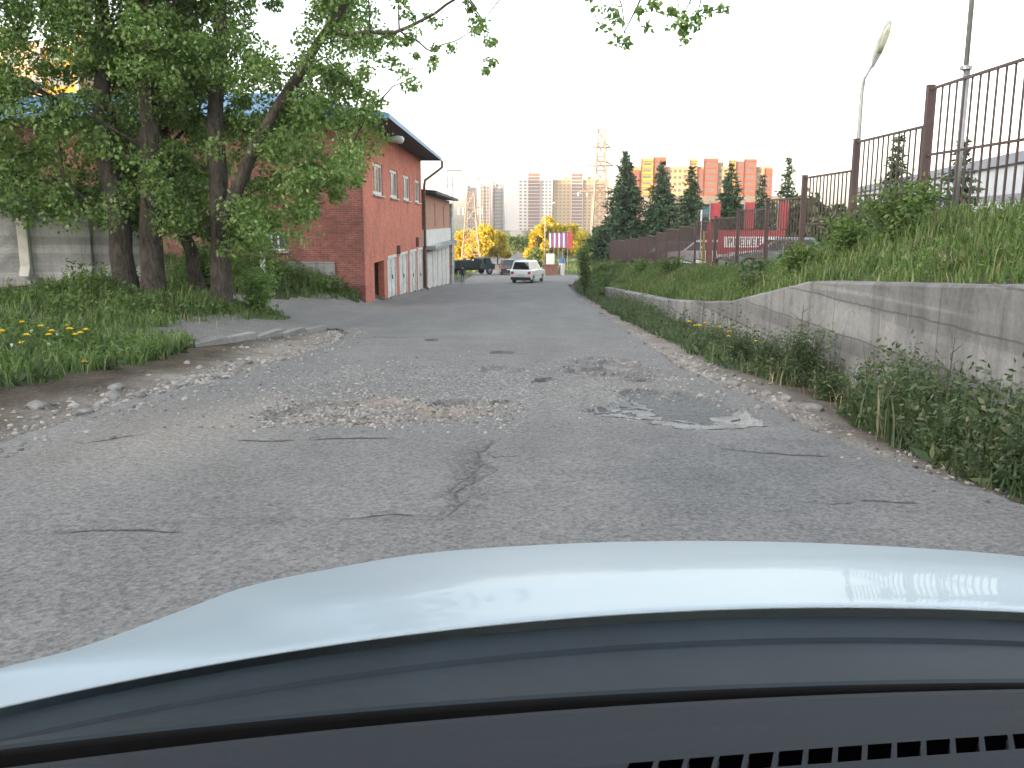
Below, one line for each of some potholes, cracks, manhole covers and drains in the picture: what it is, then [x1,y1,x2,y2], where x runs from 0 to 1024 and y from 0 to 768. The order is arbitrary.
pothole [252,397,507,428]
crack [340,442,517,520]
pothole [558,355,687,383]
pothole [583,388,767,430]
